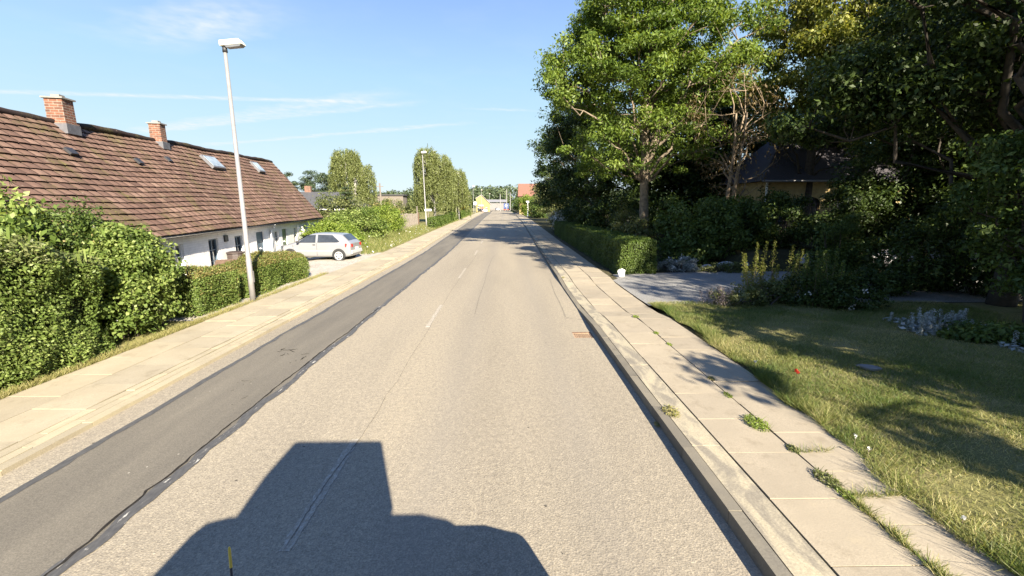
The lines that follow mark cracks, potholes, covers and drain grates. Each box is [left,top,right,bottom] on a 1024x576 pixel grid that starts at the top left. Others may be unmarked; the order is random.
crack [284,255,495,549]
